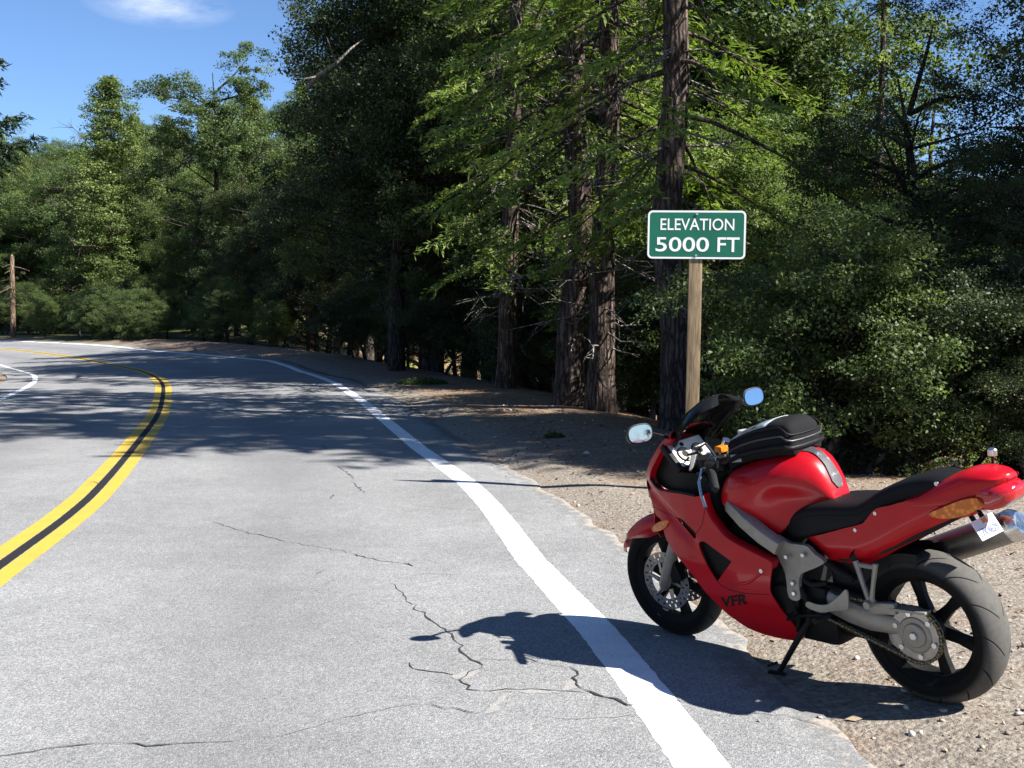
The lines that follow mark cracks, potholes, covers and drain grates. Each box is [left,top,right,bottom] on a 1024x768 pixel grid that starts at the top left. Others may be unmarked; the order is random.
crack [214,522,454,575]
crack [0,740,238,756]
crack [394,584,647,719]
